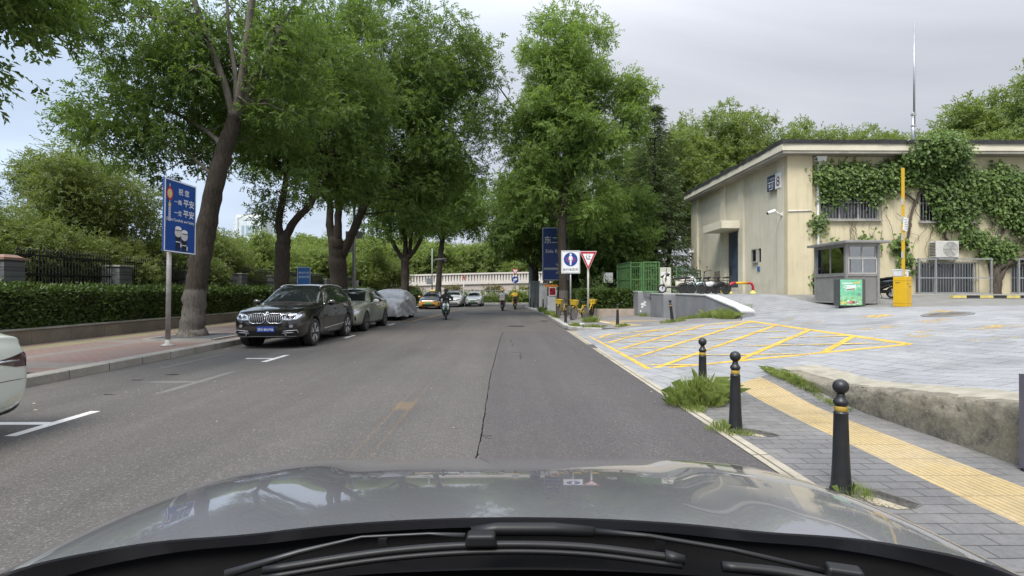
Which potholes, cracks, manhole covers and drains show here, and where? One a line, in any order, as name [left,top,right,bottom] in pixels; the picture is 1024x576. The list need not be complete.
crack [475,333,522,458]
